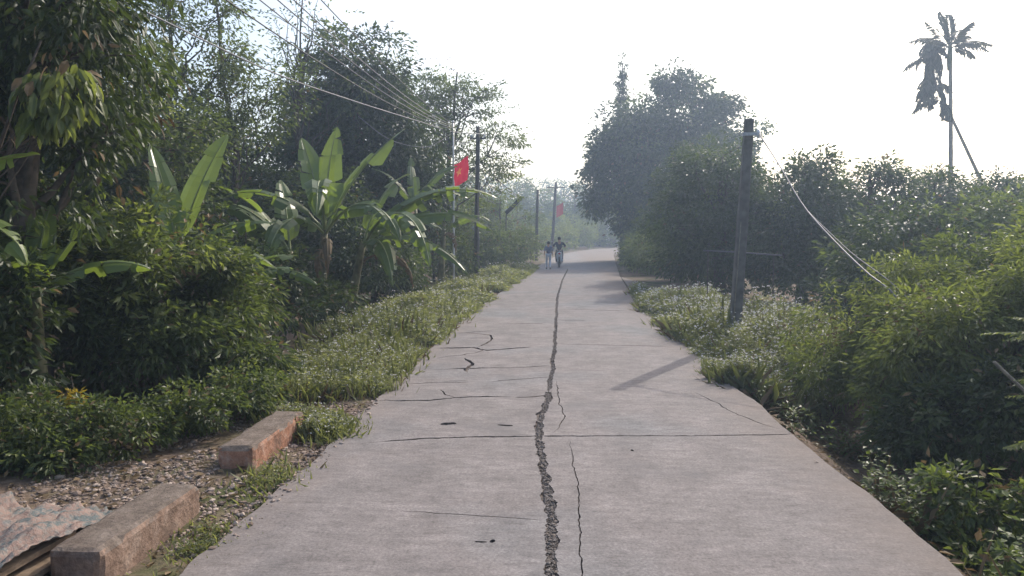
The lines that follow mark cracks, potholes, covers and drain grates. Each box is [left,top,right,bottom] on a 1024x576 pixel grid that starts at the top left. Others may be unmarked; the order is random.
crack [361,269,787,576]
